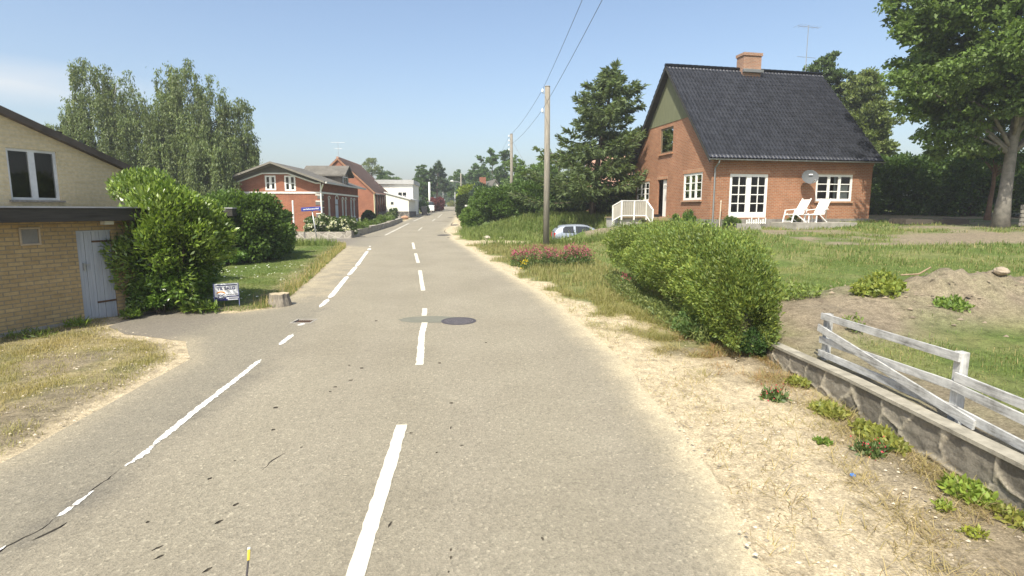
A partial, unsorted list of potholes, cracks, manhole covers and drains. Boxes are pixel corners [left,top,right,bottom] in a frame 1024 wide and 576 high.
manhole cover [441,317,476,325]
crack [32,523,66,541]
